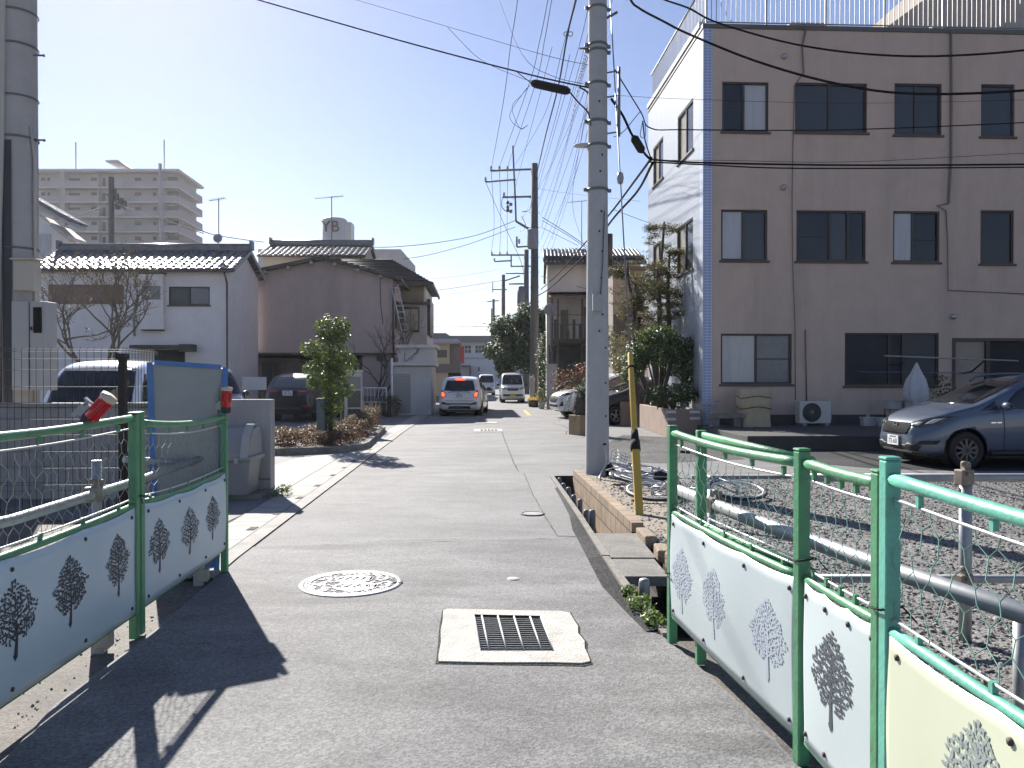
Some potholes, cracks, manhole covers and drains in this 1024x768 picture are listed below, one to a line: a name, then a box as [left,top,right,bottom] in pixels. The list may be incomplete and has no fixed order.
manhole cover [298,570,403,598]
drain grate [438,609,590,664]
